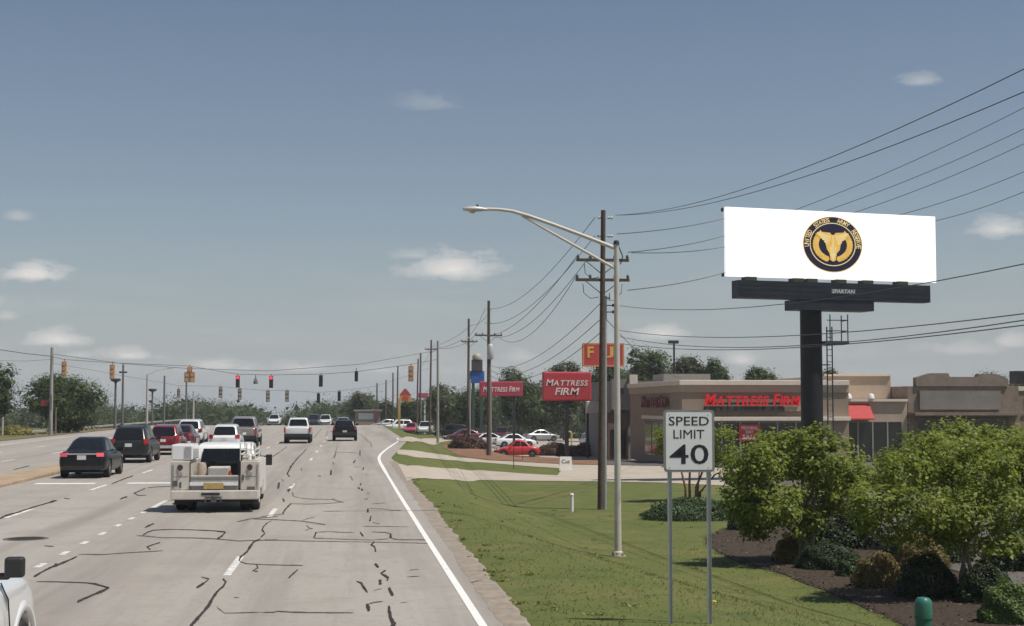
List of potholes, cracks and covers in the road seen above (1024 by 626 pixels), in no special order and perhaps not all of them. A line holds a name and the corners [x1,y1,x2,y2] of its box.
crack [34,429,426,626]
crack [0,498,69,519]
